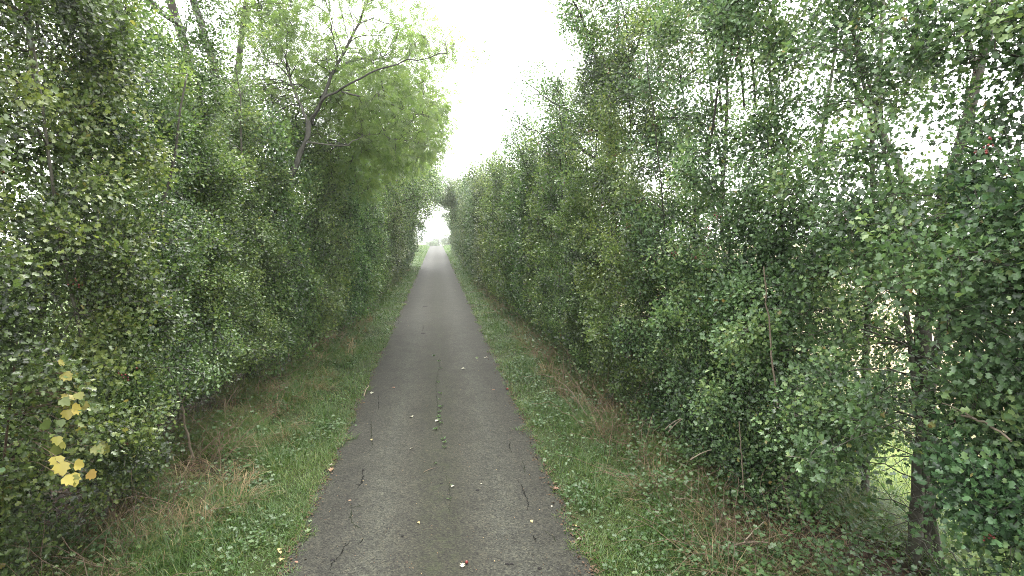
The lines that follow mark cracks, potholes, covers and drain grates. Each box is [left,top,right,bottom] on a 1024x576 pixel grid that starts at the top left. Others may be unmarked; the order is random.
crack [329,472,364,570]
